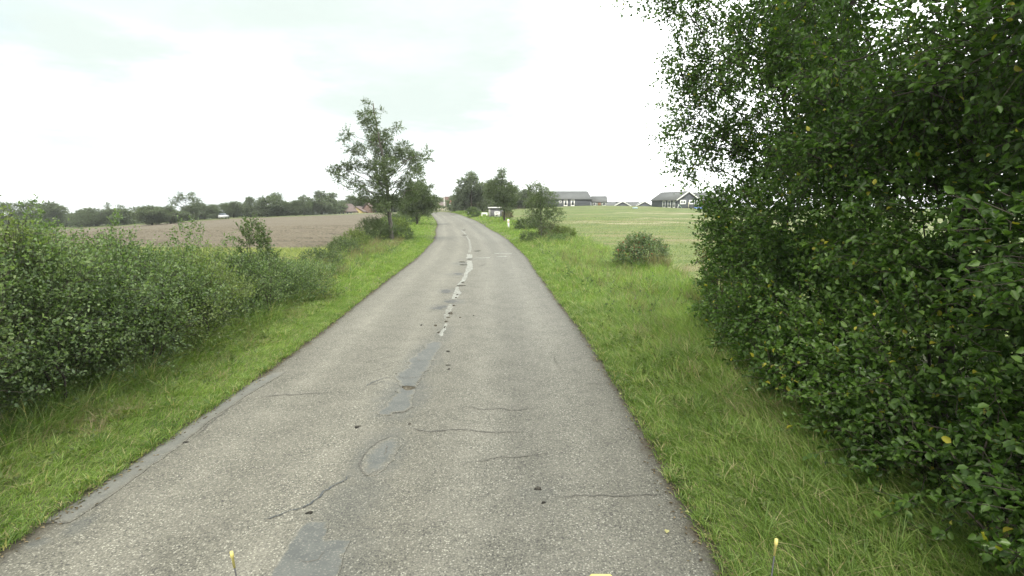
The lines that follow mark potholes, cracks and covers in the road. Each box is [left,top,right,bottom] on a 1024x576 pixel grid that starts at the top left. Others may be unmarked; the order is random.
crack [358,409,518,476]
